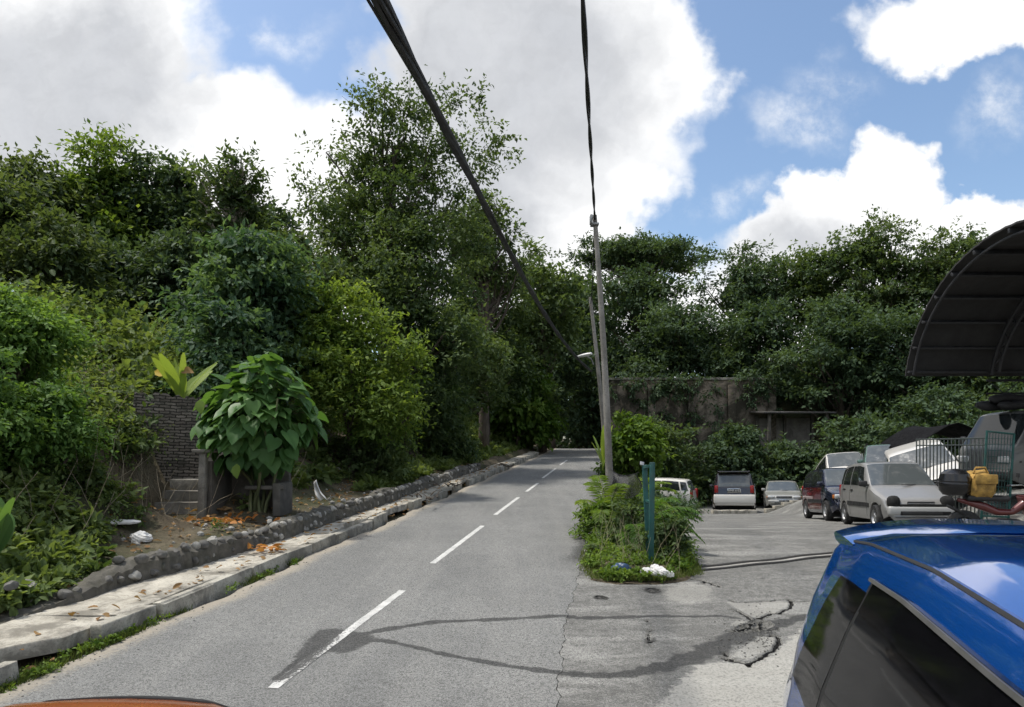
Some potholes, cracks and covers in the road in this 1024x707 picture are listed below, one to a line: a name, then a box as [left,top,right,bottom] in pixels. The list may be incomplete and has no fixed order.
pothole [734,619,775,633]
